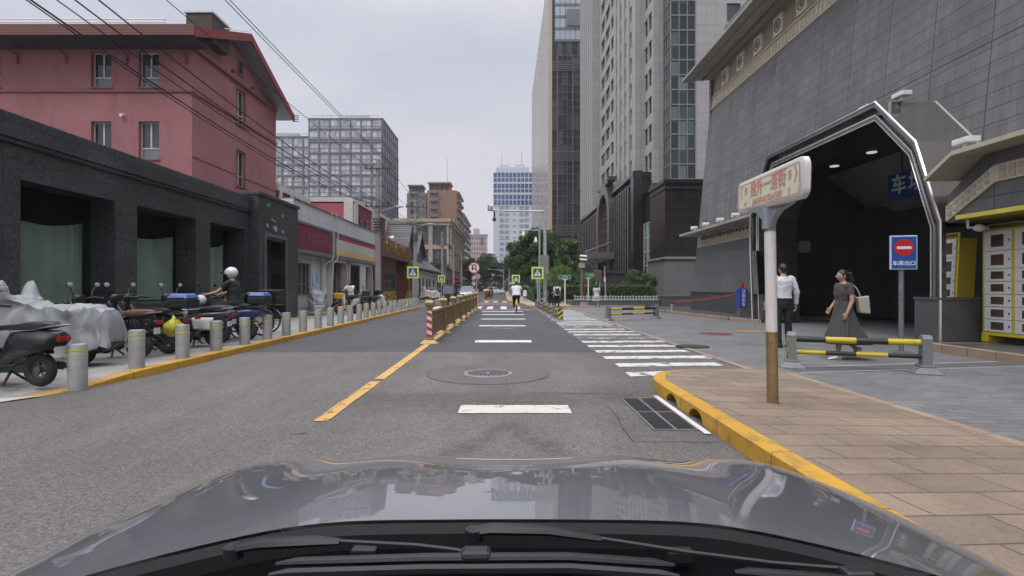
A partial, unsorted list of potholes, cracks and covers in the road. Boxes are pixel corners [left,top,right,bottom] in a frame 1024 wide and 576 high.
drain grate [620,398,699,431]
crack [603,393,720,443]
manhole cover [464,369,511,377]
